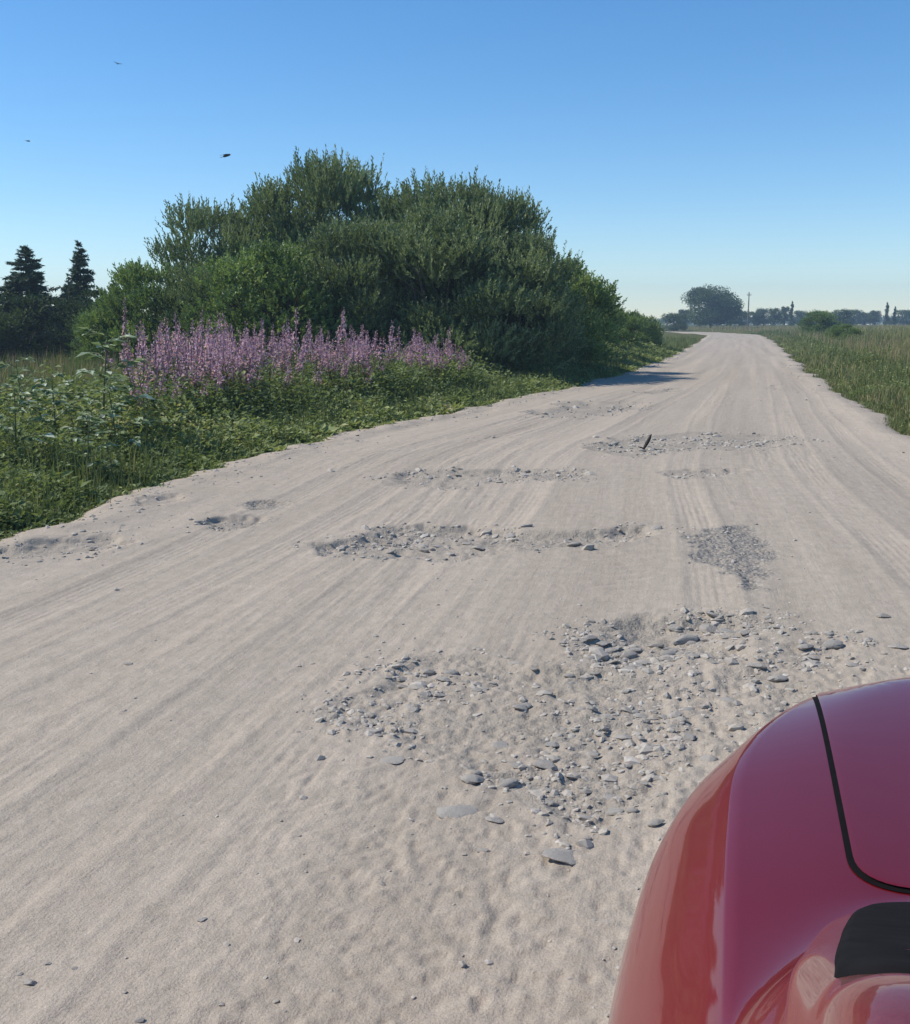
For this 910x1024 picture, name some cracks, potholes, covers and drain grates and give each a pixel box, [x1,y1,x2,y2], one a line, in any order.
pothole [650,467,754,480]
pothole [238,496,299,511]
pothole [522,400,656,419]
pothole [288,522,681,563]
pothole [304,637,879,836]
pothole [581,431,831,457]
pothole [365,467,596,491]
pothole [0,531,146,561]
pothole [539,608,797,676]
pothole [189,512,278,533]
